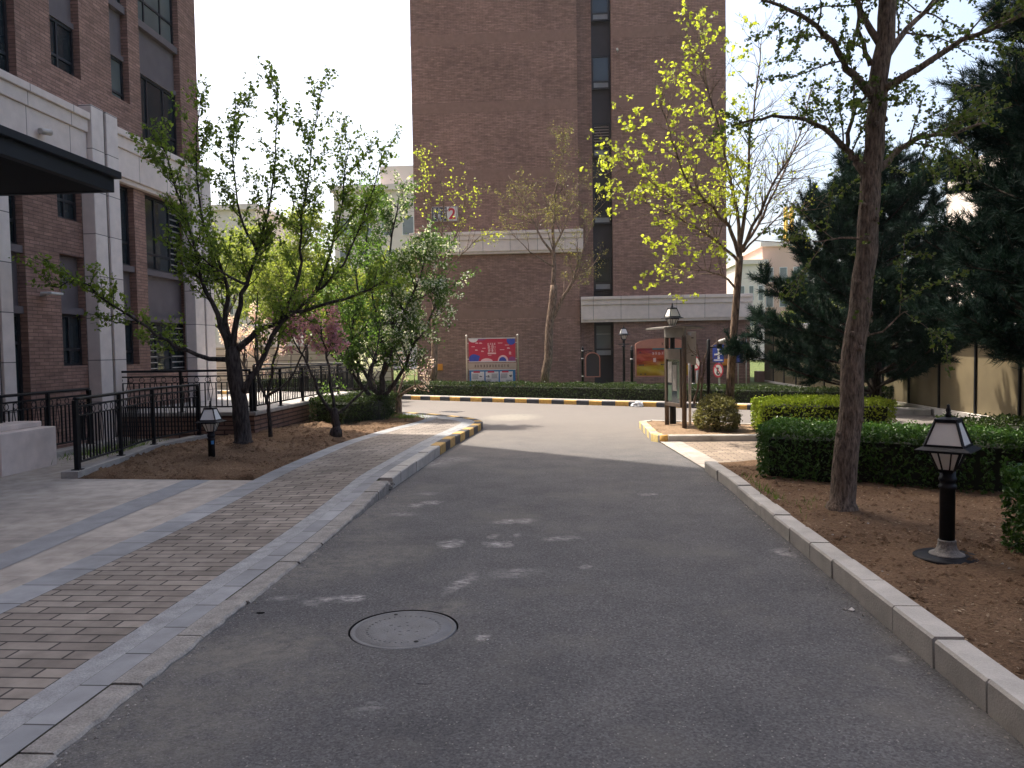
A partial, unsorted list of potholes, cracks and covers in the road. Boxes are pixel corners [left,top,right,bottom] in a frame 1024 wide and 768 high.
manhole cover [348,610,458,649]
